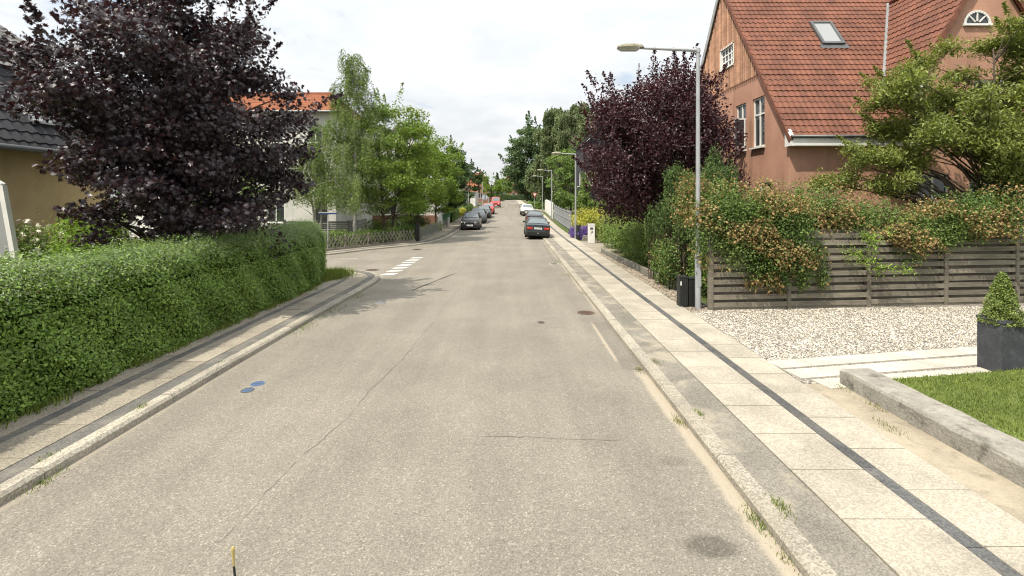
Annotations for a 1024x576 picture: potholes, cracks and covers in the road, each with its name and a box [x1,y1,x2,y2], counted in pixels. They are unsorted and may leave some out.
crack [478,436,621,444]
